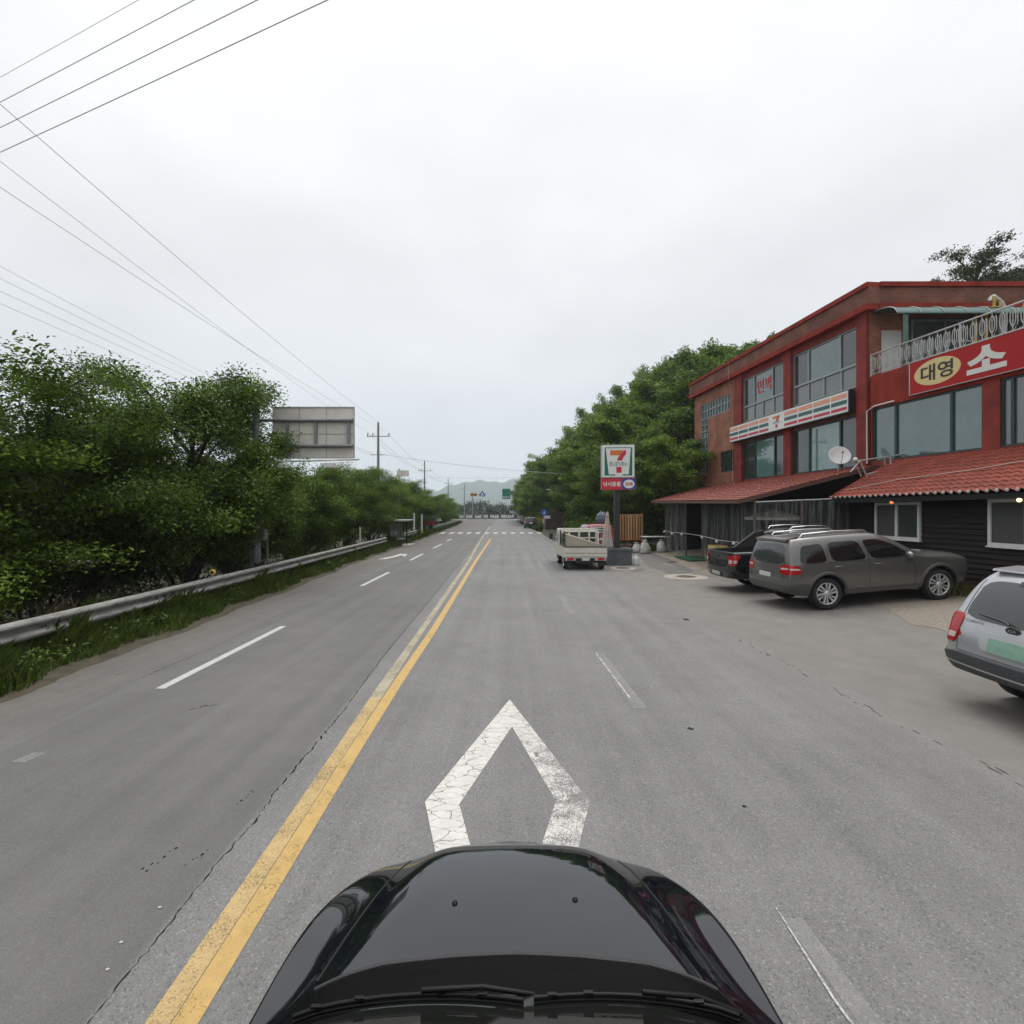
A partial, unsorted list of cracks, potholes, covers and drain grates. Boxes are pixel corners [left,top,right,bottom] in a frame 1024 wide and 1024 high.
crack [979,760,1023,787]
